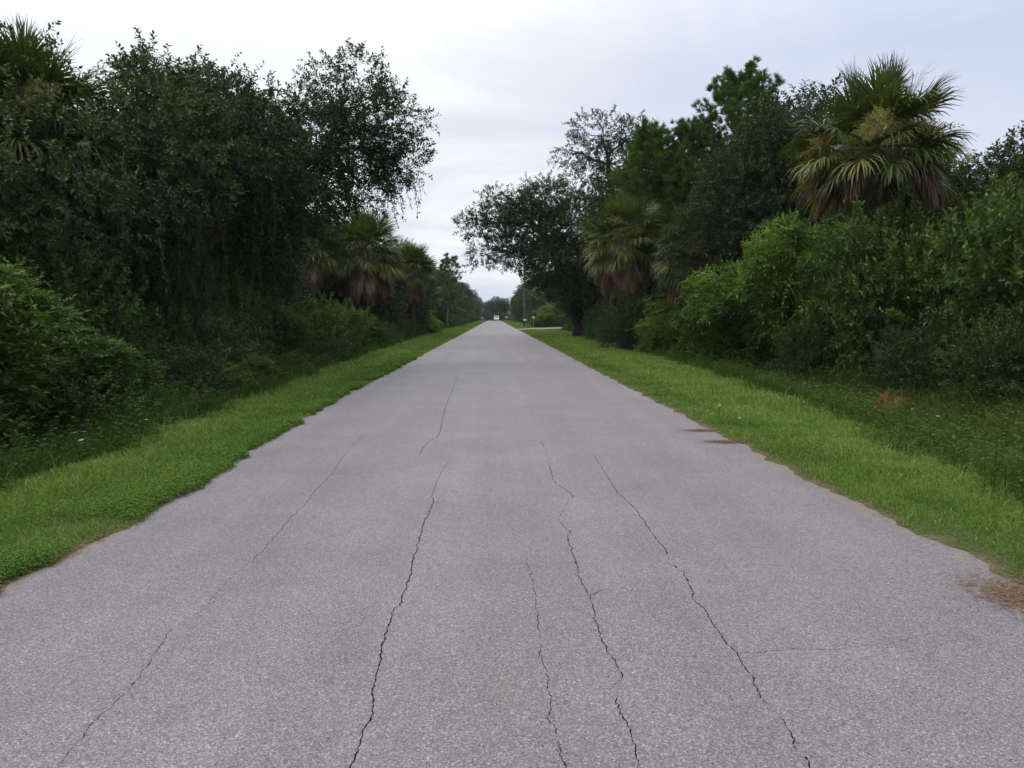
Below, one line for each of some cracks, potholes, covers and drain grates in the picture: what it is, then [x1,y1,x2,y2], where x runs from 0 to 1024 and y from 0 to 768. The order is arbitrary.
crack [541,442,639,768]
crack [599,464,930,768]
crack [59,444,387,767]
crack [349,463,448,768]
crack [526,559,567,768]
